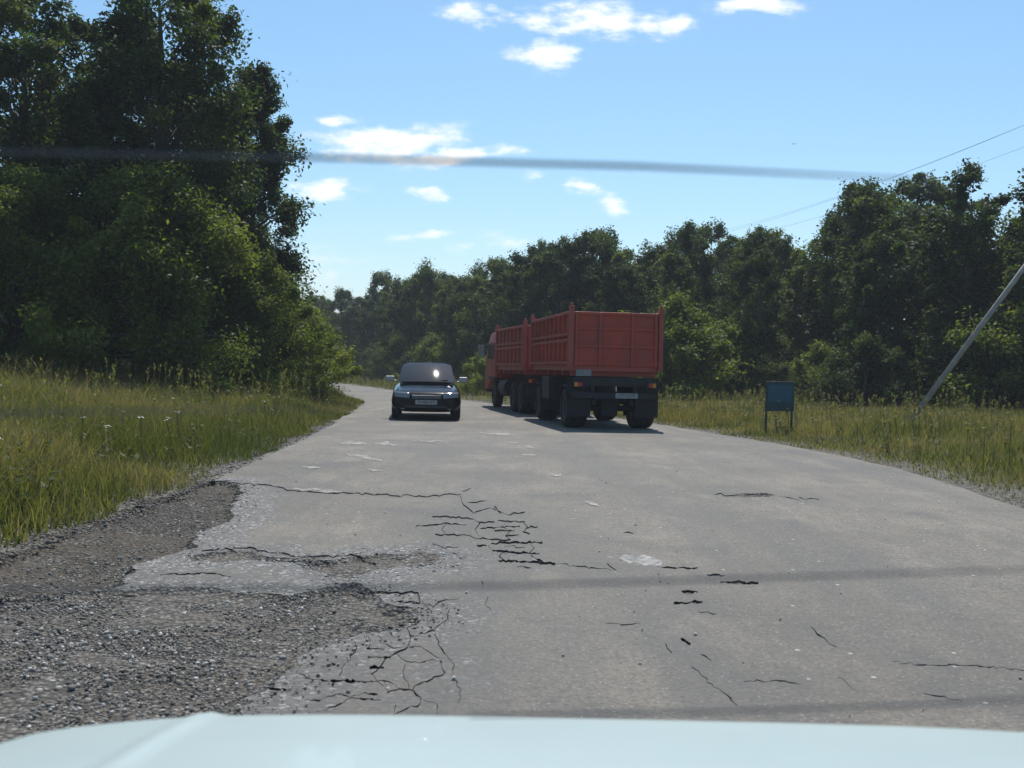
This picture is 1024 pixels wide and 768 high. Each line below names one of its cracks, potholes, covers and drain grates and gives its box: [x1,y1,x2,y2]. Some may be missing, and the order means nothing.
pothole [0,583,422,743]
crack [214,482,617,571]
crack [203,547,461,715]
